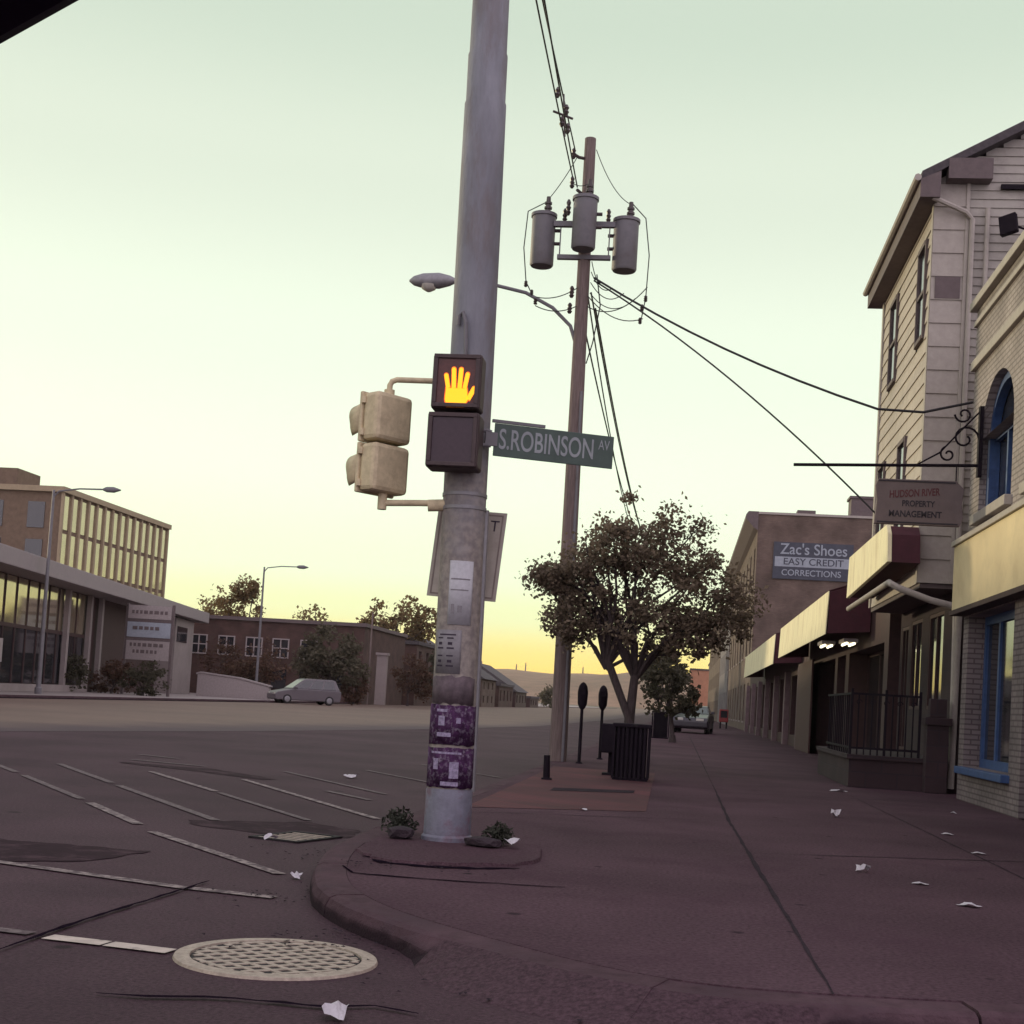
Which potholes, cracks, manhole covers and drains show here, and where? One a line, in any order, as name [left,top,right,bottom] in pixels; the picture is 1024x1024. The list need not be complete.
manhole cover [172,938,378,981]
drain grate [248,831,343,844]
crack [96,992,416,1013]
